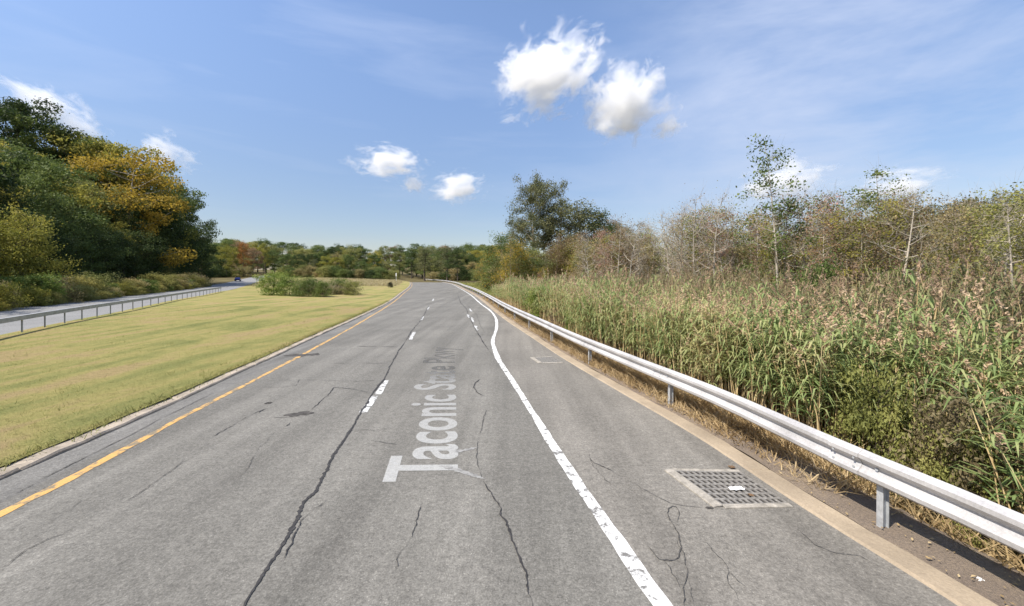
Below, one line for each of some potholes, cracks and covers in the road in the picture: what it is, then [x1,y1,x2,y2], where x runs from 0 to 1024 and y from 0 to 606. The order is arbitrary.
crack [476,412,533,606]
drain grate [665,468,793,509]
crack [575,434,695,603]
crack [166,380,373,526]
